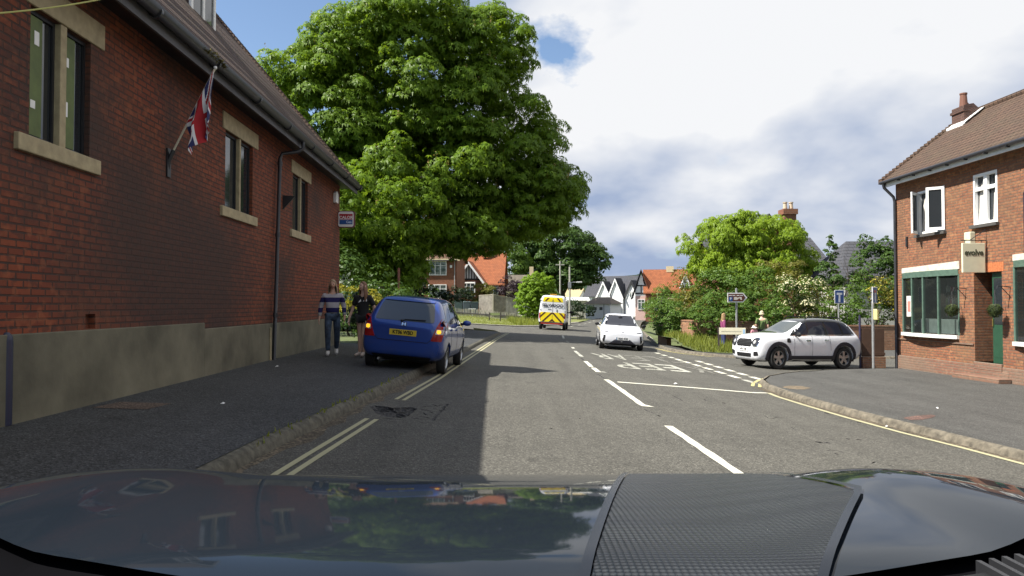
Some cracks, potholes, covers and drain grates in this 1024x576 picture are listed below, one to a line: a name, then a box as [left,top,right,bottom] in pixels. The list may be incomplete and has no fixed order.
pothole [370,405,418,418]
